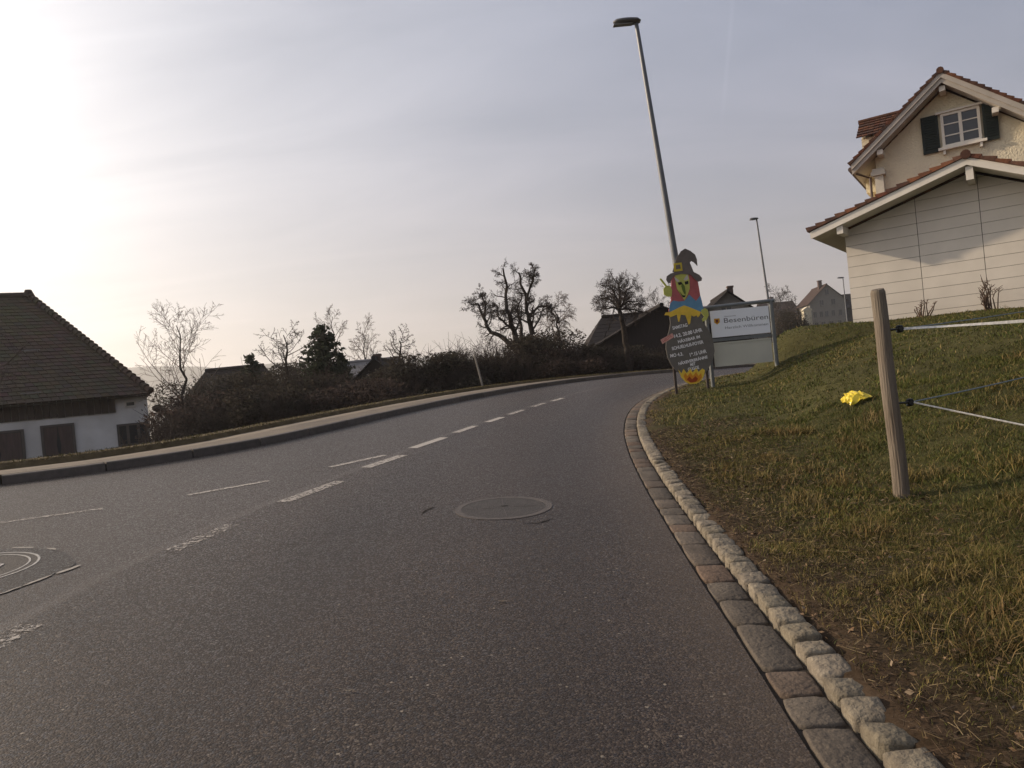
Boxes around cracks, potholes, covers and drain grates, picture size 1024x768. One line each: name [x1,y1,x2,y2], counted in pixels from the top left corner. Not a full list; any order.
manhole cover [455,496,552,520]
